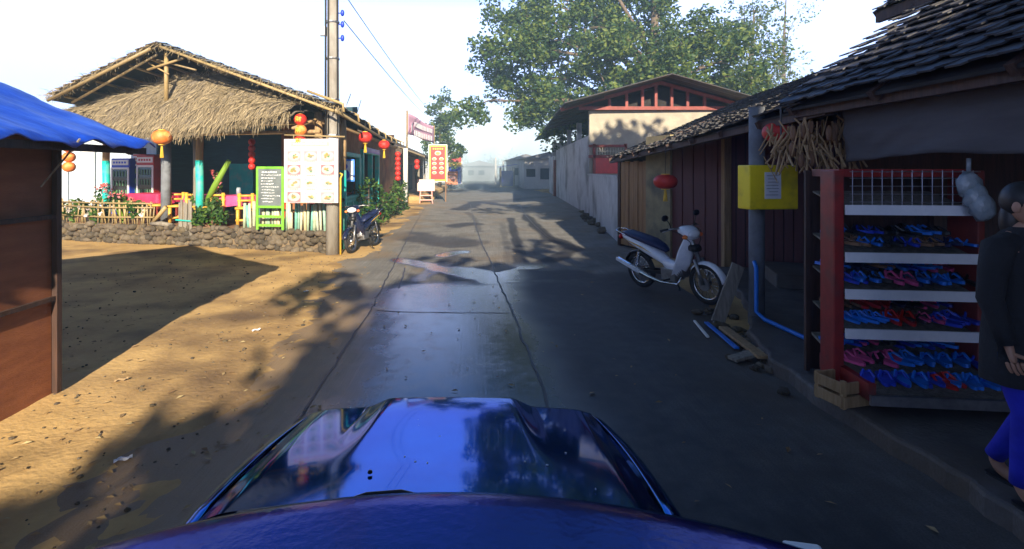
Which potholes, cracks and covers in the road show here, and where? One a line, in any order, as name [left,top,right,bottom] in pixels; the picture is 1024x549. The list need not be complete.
crack [292,204,566,425]
